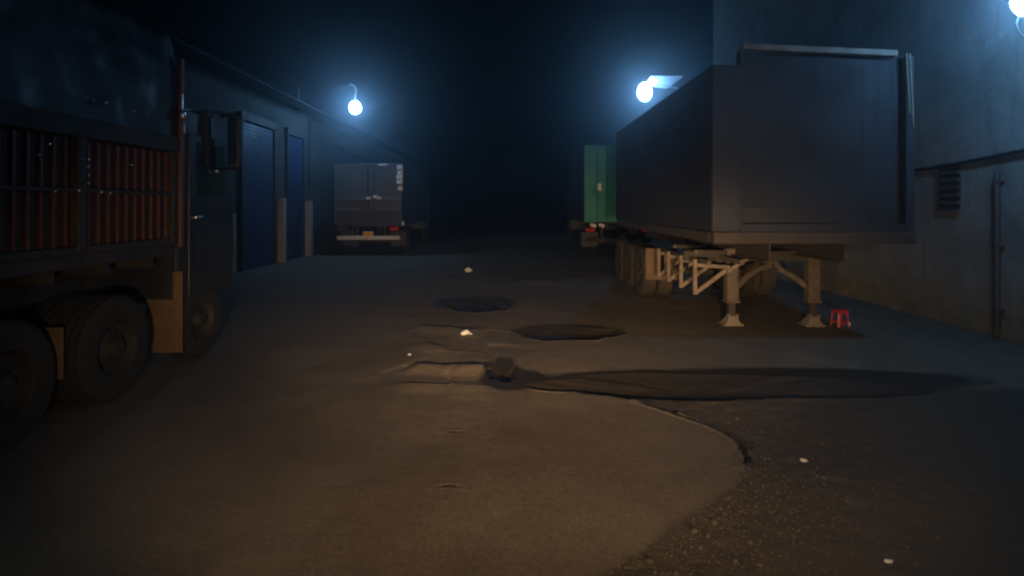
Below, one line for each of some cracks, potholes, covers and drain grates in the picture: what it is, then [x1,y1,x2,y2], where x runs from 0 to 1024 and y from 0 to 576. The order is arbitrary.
pothole [506,325,630,342]
pothole [440,296,512,313]
pothole [478,356,523,385]
